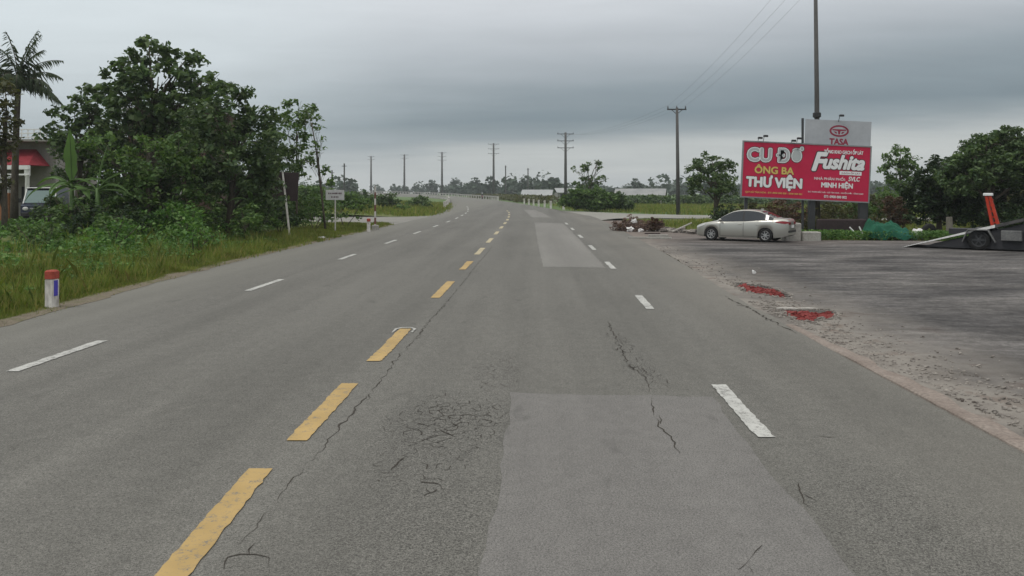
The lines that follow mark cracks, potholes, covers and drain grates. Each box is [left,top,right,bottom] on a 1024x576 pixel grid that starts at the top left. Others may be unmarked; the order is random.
crack [353,357,521,496]
crack [224,248,491,574]
crack [606,321,680,453]
